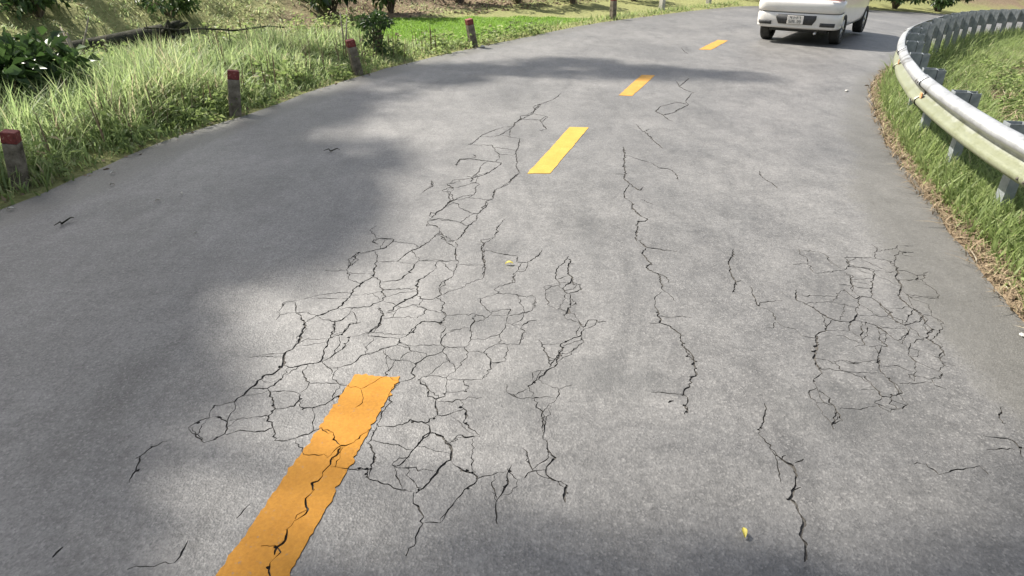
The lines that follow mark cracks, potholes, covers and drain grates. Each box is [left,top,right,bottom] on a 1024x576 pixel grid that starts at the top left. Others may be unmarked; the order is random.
crack [129,541,188,569]
crack [622,78,698,414]
crack [757,403,808,562]
crack [914,407,1022,475]
crack [188,94,606,576]
crack [728,245,949,429]
crack [129,441,167,483]
